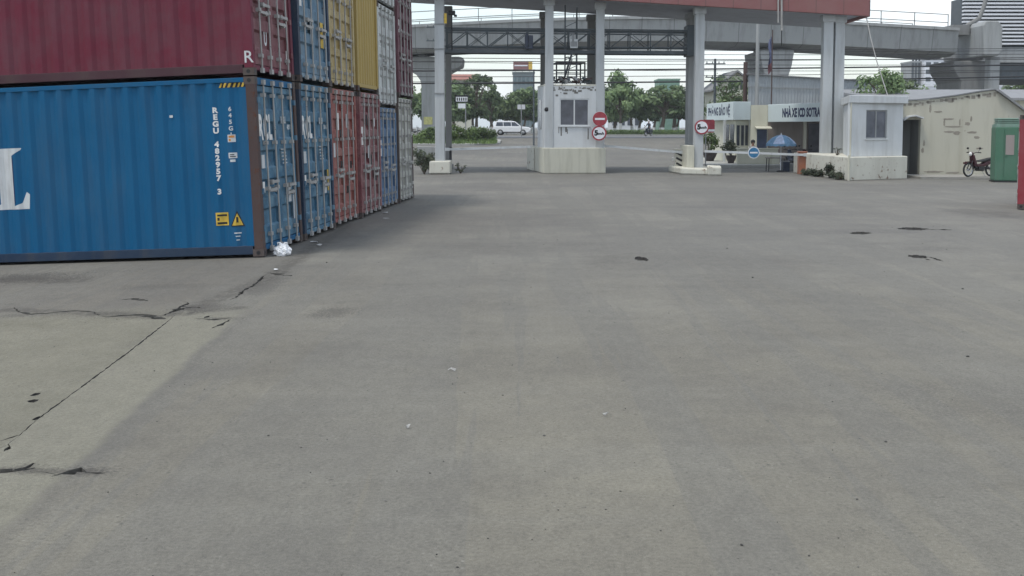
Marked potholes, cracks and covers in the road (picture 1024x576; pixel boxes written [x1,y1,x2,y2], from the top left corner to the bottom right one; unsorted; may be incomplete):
crack [230,273,292,300]
crack [0,298,229,476]
